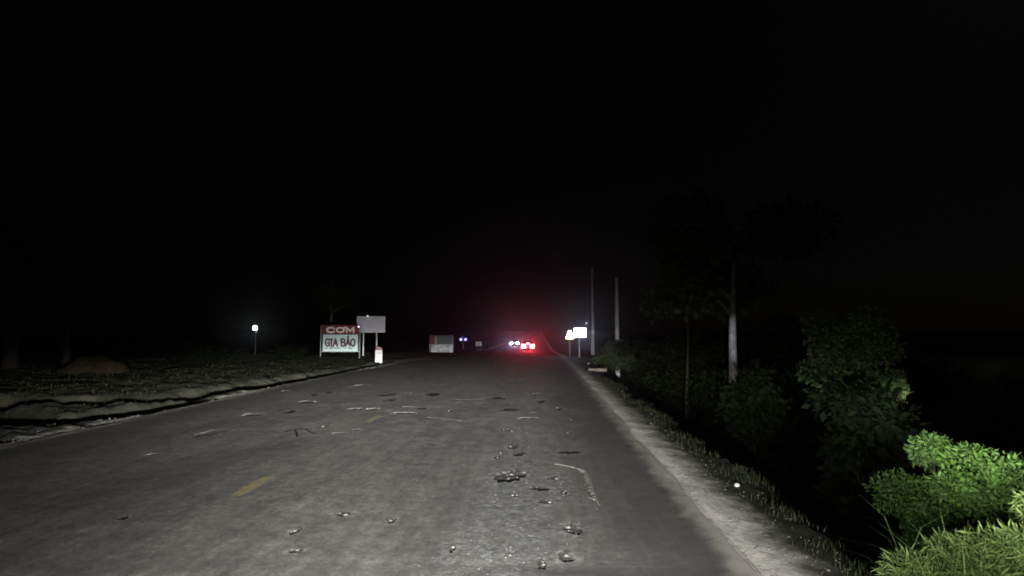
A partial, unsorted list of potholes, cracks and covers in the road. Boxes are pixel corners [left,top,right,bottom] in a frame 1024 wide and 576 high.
pothole [494,469,527,483]
pothole [192,428,228,438]
pothole [562,524,584,536]
pothole [558,552,576,562]
